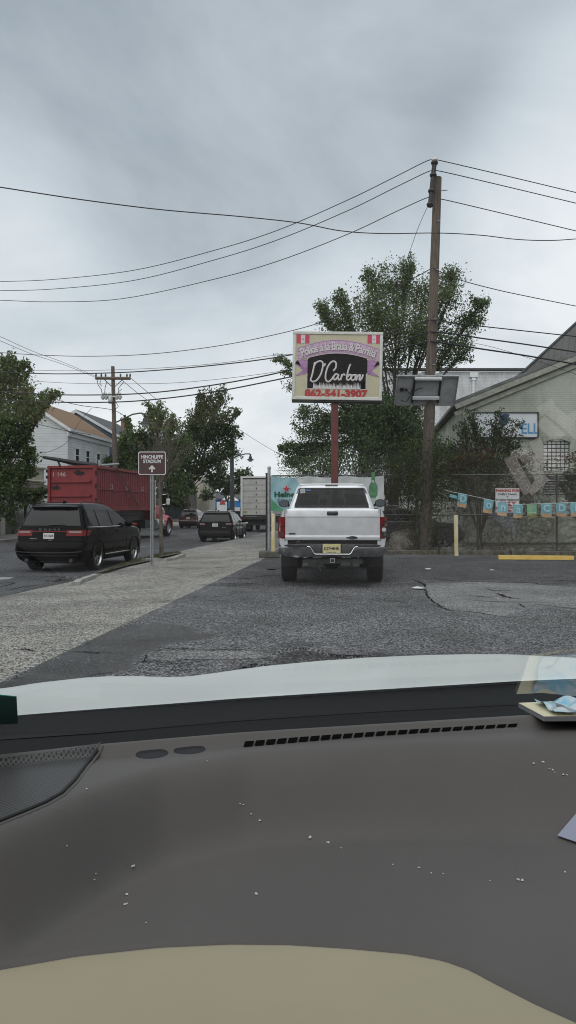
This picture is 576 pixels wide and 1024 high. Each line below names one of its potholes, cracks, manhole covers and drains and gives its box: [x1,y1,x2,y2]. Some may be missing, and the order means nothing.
crack [414,568,576,617]
crack [137,648,273,665]
